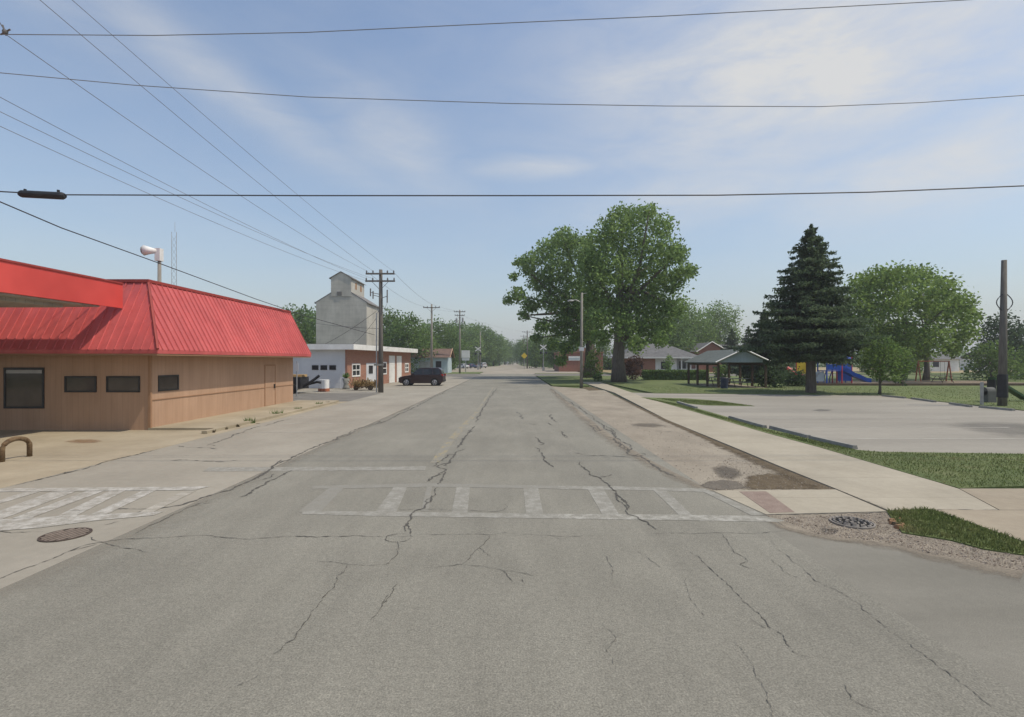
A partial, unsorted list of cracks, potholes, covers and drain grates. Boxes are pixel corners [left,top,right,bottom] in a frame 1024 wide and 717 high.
manhole cover [37,527,93,542]
crack [535,389,887,570]
crack [273,560,357,654]
crack [1,388,592,582]
crack [692,553,805,656]
